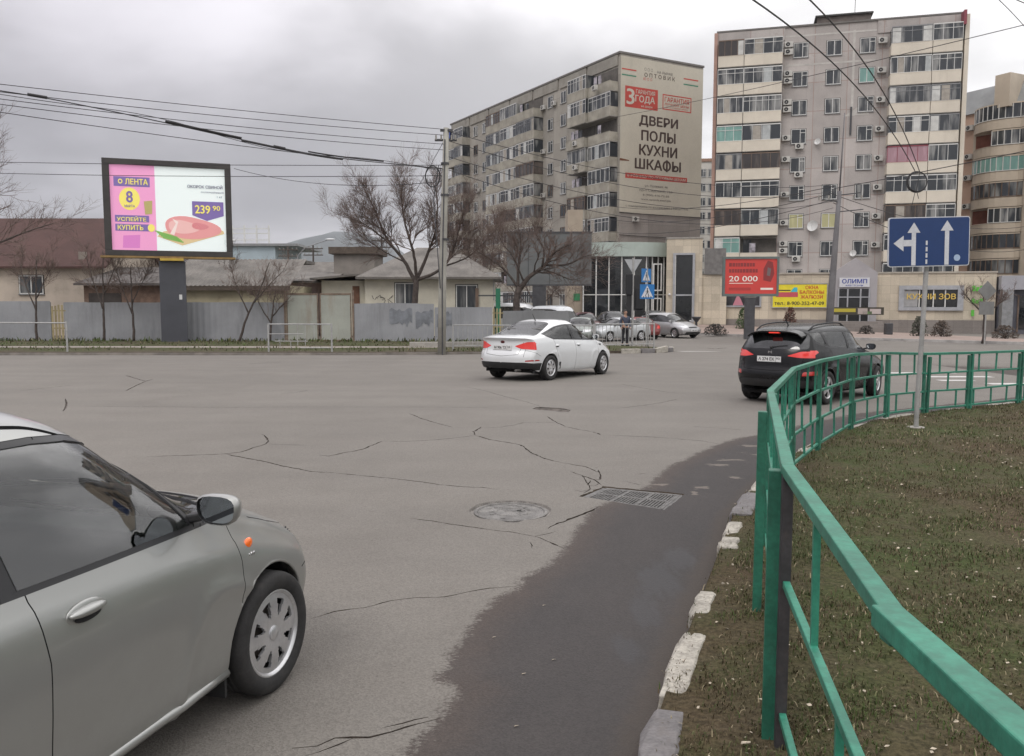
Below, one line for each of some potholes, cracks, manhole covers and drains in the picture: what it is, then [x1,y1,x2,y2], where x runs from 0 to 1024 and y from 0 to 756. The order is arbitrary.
crack [318,586,511,617]
crack [298,717,443,756]
crack [152,435,491,489]
manhole cover [469,501,551,523]
drain grate [580,486,684,510]
crack [322,387,698,547]
